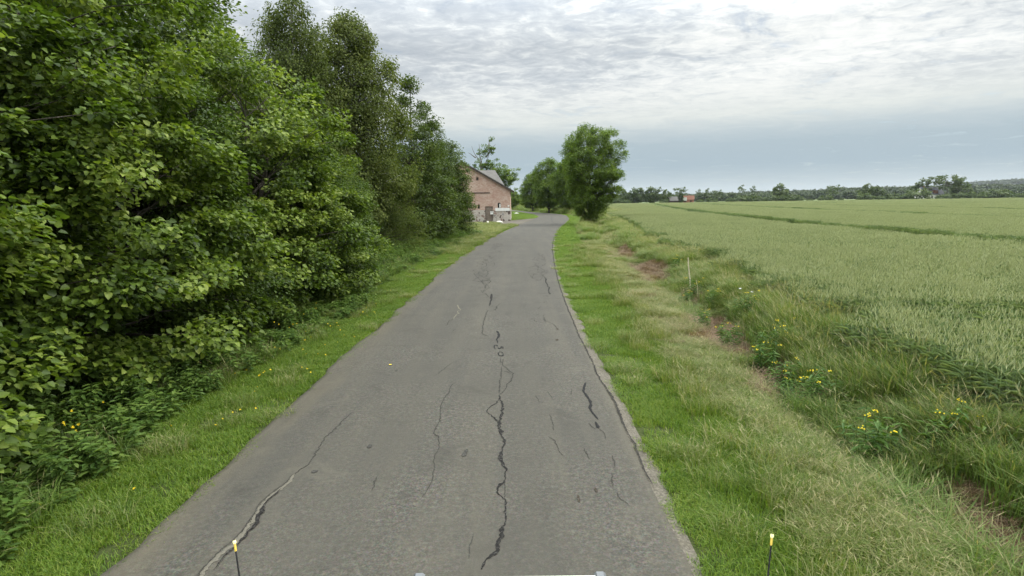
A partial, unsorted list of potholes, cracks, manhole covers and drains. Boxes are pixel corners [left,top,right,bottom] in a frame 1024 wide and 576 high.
crack [469,358,514,569]
crack [473,244,502,337]
crack [421,364,453,498]
crack [197,413,351,576]
crack [530,235,652,506]
